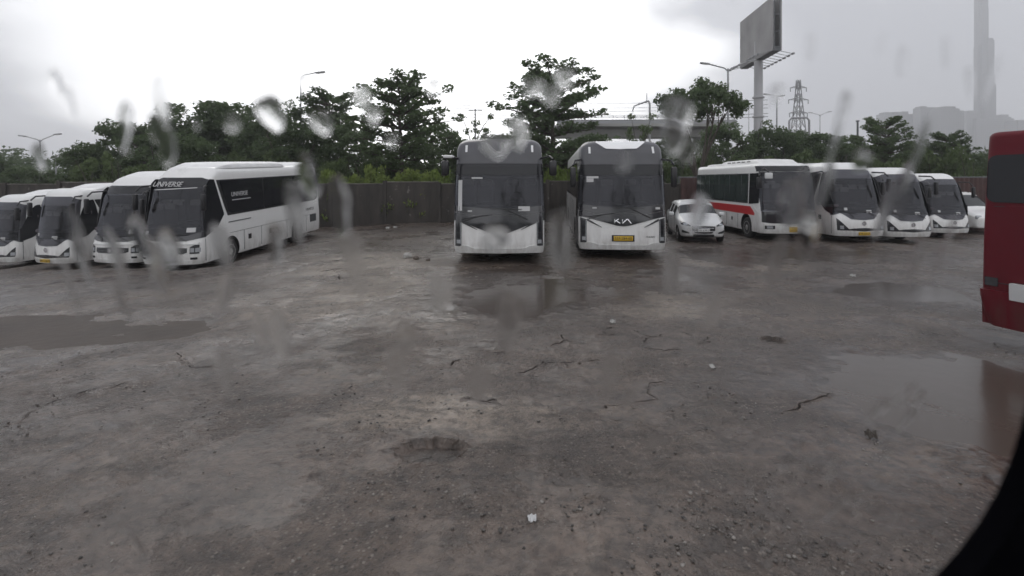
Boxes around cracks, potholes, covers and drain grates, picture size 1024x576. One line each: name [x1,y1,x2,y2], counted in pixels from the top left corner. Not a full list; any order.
crack [17,382,128,424]
crack [448,359,461,368]
crack [173,351,216,369]
pothole [377,433,482,468]
crack [606,381,666,409]
crack [484,327,712,375]
crack [781,393,836,414]
pothole [757,335,791,344]
